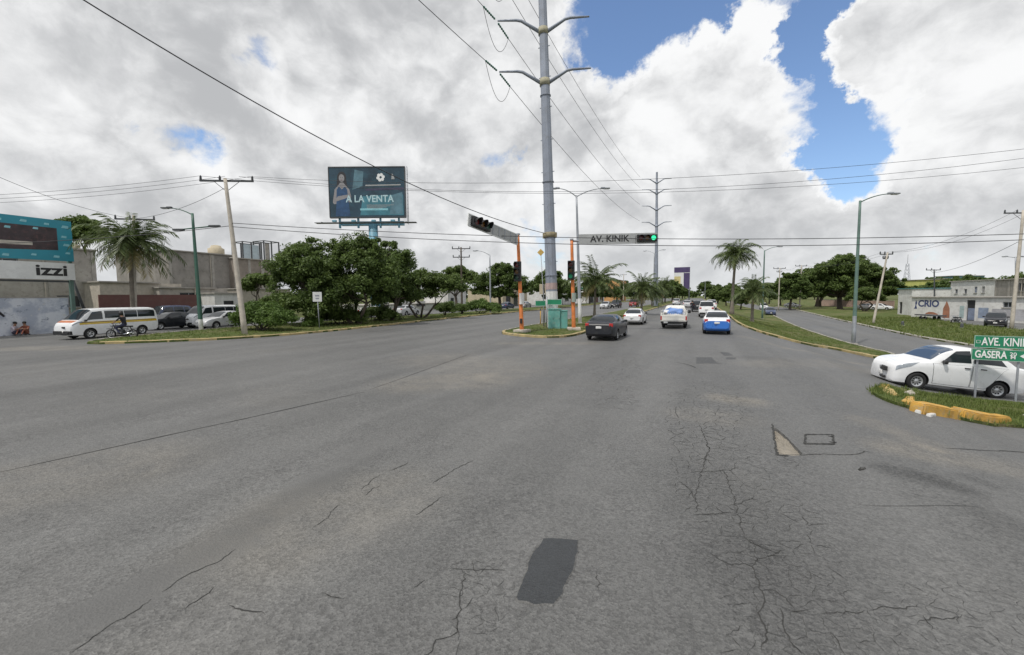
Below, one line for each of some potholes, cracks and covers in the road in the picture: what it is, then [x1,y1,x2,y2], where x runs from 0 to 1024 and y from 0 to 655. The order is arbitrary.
crack [665,381,1024,655]
manhole cover [803,434,836,444]
crack [75,551,232,650]
crack [424,560,515,655]
